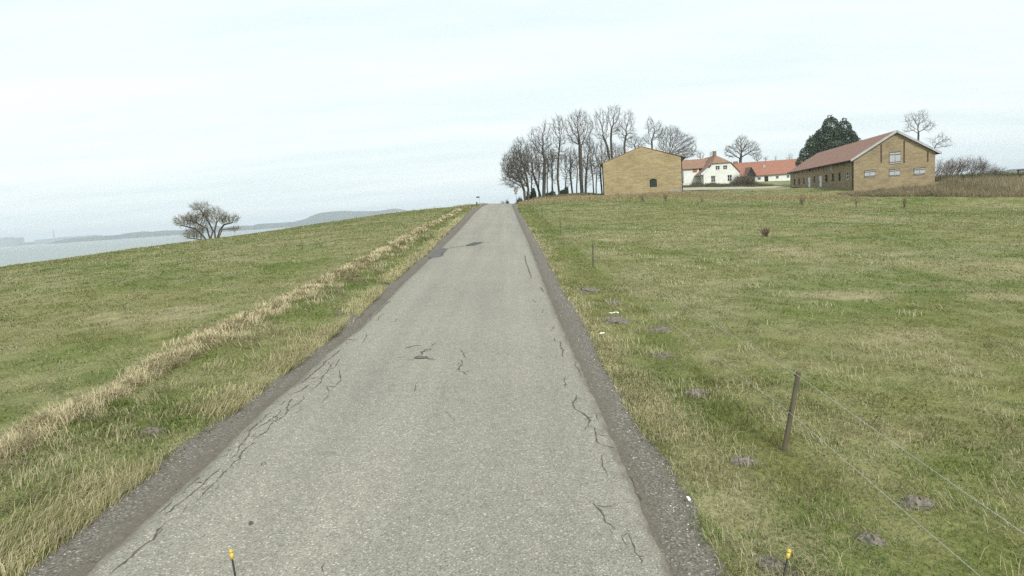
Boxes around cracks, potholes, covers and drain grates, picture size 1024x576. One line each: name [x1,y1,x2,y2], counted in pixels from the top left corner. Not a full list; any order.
crack [110,301,396,574]
crack [595,504,646,564]
crack [525,257,610,475]
